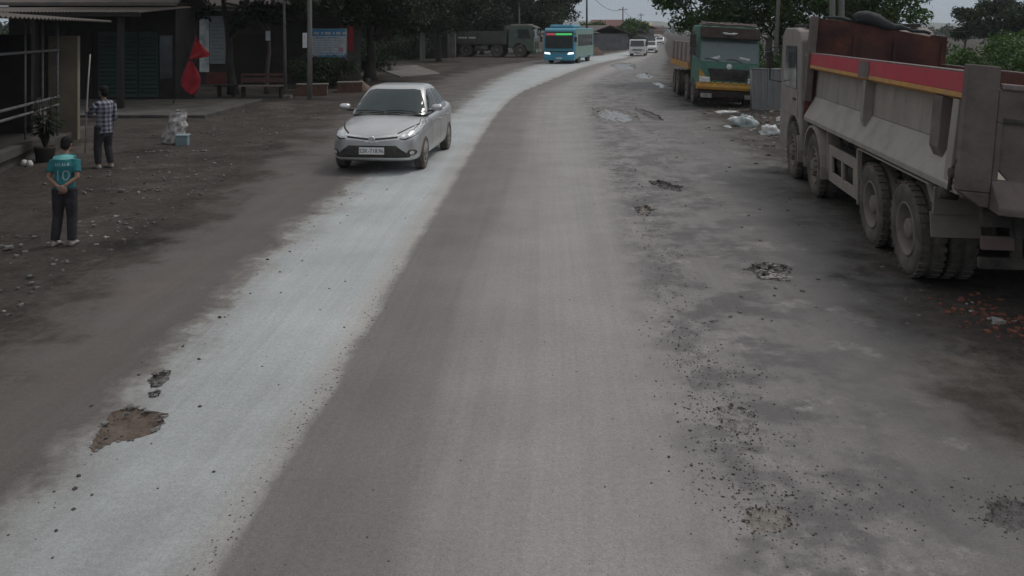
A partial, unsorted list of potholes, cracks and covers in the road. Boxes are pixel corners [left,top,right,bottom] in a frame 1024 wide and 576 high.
pothole [634,108,664,121]
pothole [649,179,684,192]
pothole [148,370,171,388]
pothole [610,62,636,70]
pothole [737,506,800,536]
pothole [634,205,655,216]
pothole [89,403,169,455]
pothole [743,262,793,281]
pothole [592,106,640,124]
